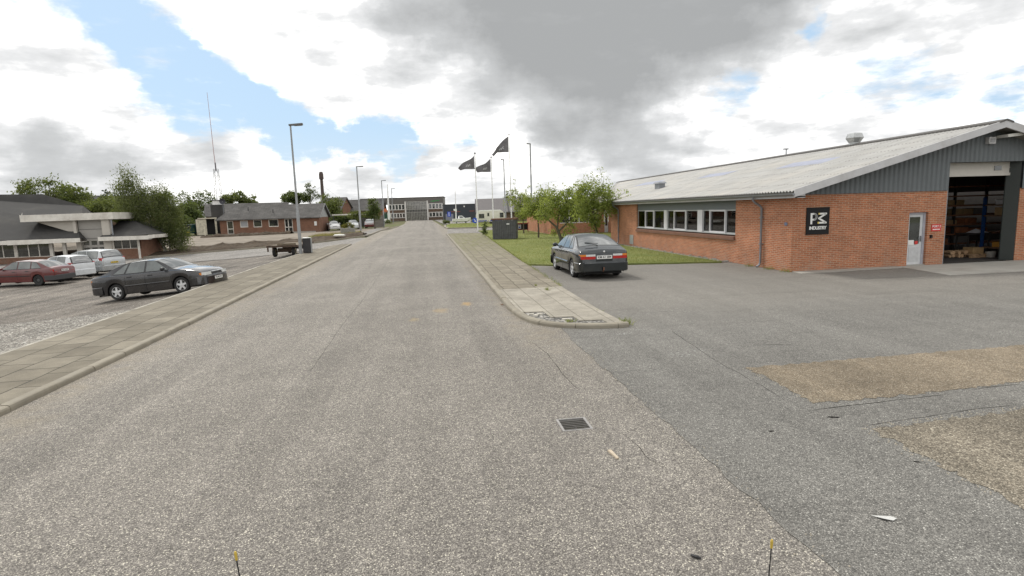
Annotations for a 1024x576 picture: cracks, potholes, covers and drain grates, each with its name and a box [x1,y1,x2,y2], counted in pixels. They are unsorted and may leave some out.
drain grate [556,417,593,432]
